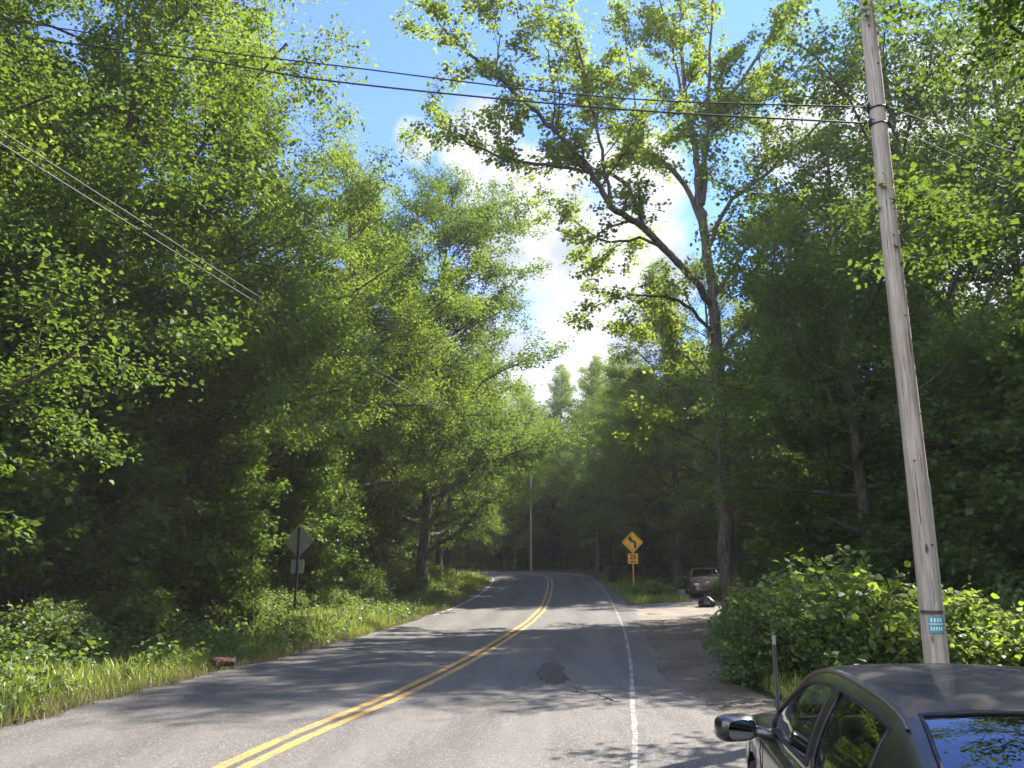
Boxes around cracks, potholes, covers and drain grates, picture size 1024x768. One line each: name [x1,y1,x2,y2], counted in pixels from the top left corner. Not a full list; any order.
crack [568,686,621,703]
